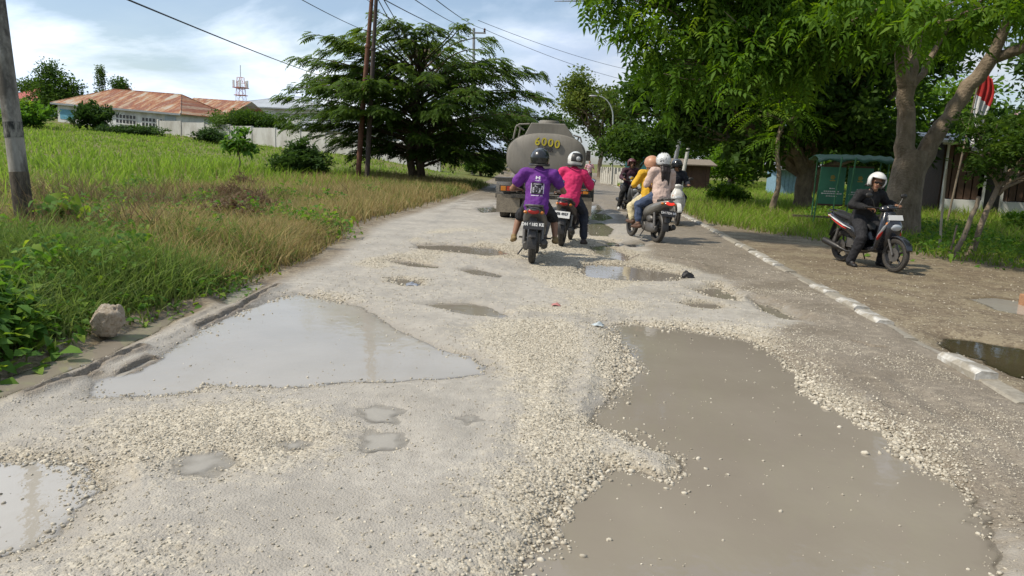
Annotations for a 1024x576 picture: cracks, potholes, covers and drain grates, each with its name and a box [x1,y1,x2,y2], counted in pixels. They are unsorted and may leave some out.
pothole [385,276,428,286]
pothole [70,288,505,402]
pothole [0,445,135,565]
pothole [342,424,424,456]
pothole [479,317,1024,576]
pothole [411,241,520,256]
pothole [572,260,694,281]
pothole [333,396,422,426]
pothole [455,265,509,278]
pothole [141,443,252,483]
